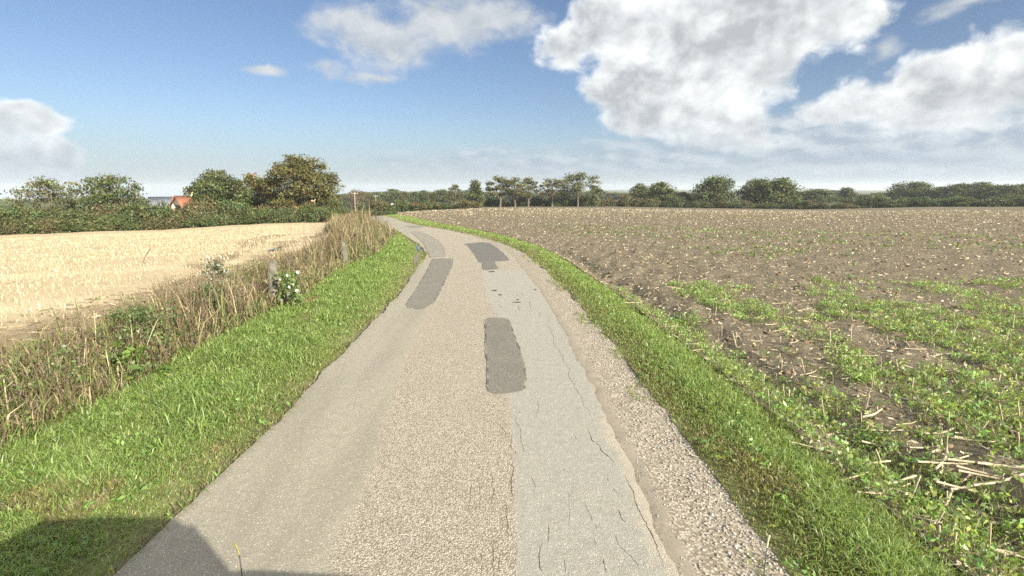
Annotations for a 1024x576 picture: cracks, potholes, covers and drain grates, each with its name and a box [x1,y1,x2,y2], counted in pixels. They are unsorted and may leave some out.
crack [468,473,509,572]
crack [568,429,664,573]
